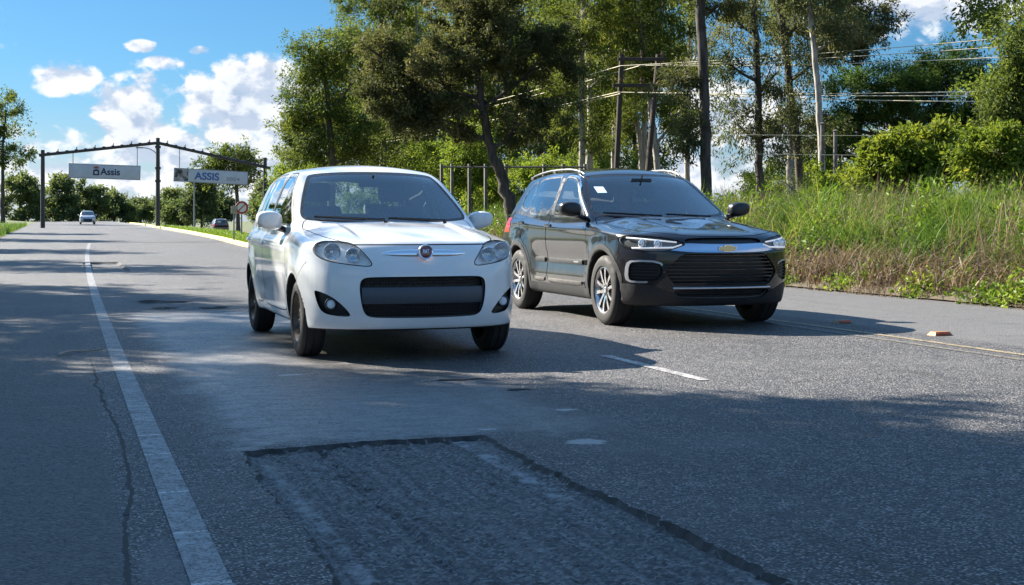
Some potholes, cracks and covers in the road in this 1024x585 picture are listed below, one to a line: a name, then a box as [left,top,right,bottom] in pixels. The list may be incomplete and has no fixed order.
crack [89,355,135,585]
